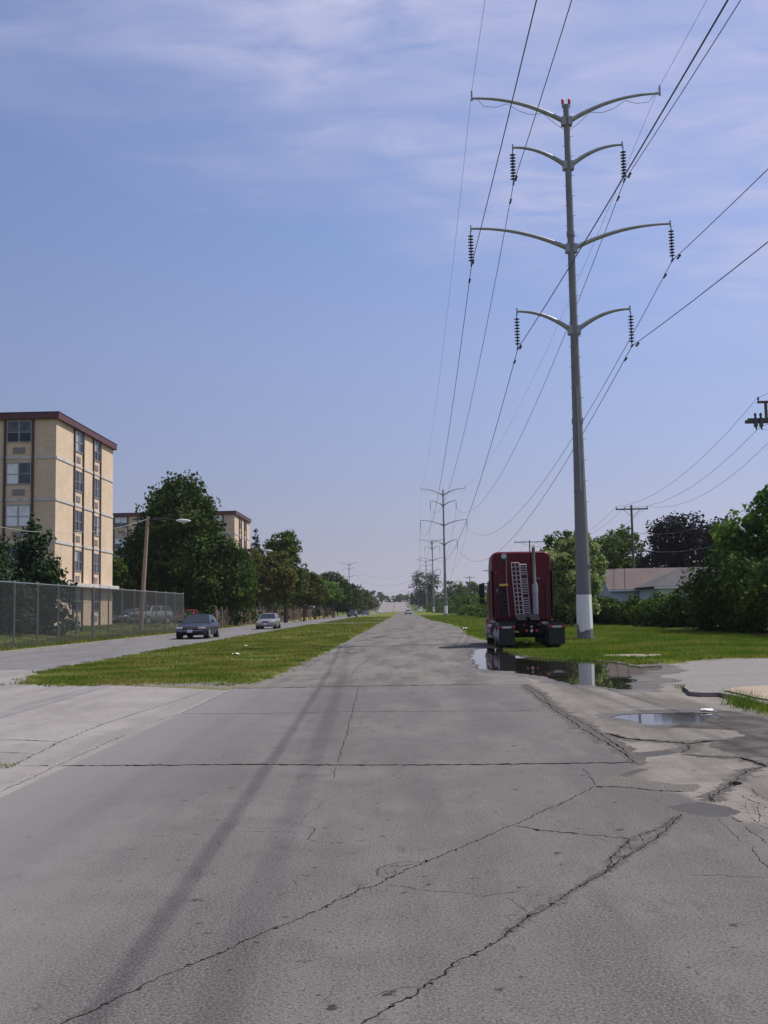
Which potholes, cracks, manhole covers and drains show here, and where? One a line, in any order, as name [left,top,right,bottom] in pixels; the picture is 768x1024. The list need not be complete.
crack [333,656,371,777]
crack [60,770,712,1024]
crack [524,685,768,866]
